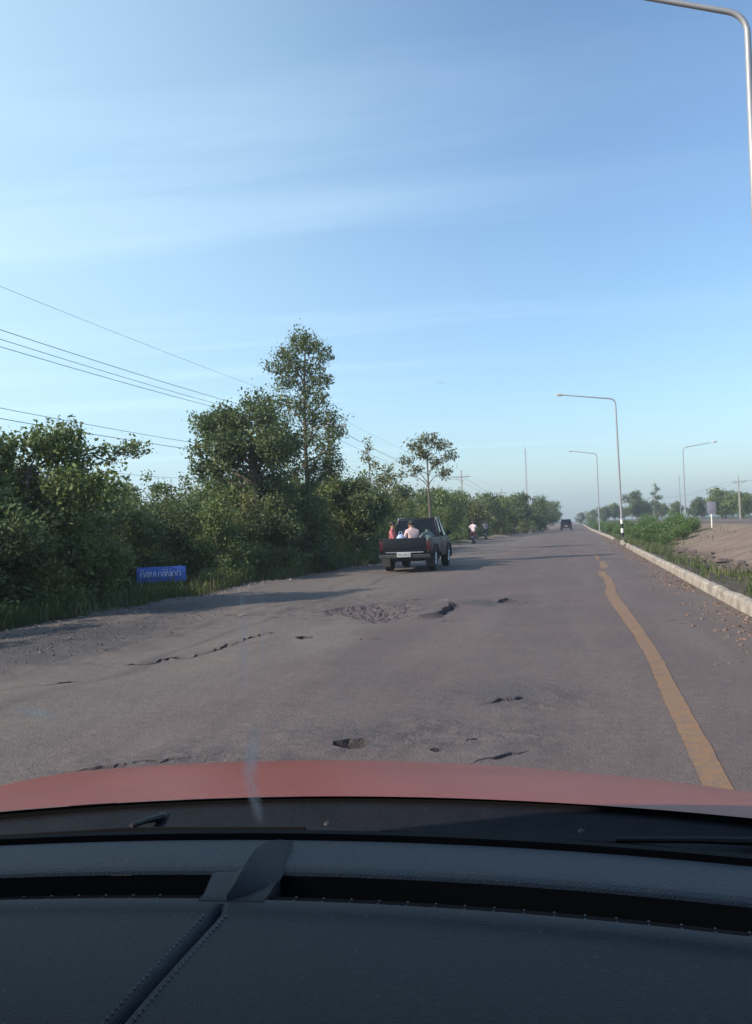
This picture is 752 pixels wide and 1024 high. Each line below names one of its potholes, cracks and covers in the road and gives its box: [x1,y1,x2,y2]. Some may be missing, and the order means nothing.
crack [124,614,272,666]
pothole [332,738,370,749]
crack [467,738,528,764]
pothole [323,603,423,624]
crack [58,752,237,774]
